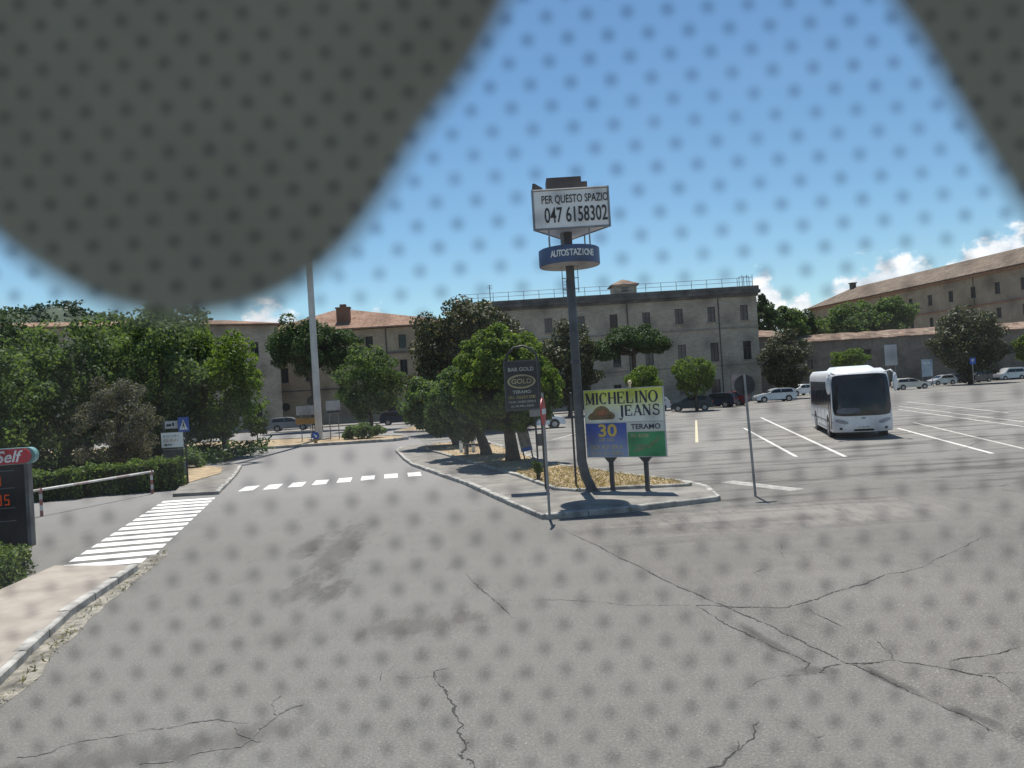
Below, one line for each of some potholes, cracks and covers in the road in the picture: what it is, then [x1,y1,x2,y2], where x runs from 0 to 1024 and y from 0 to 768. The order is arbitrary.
crack [380,668,475,768]
crack [696,605,1018,691]
crack [14,696,304,764]
crack [707,723,757,768]
